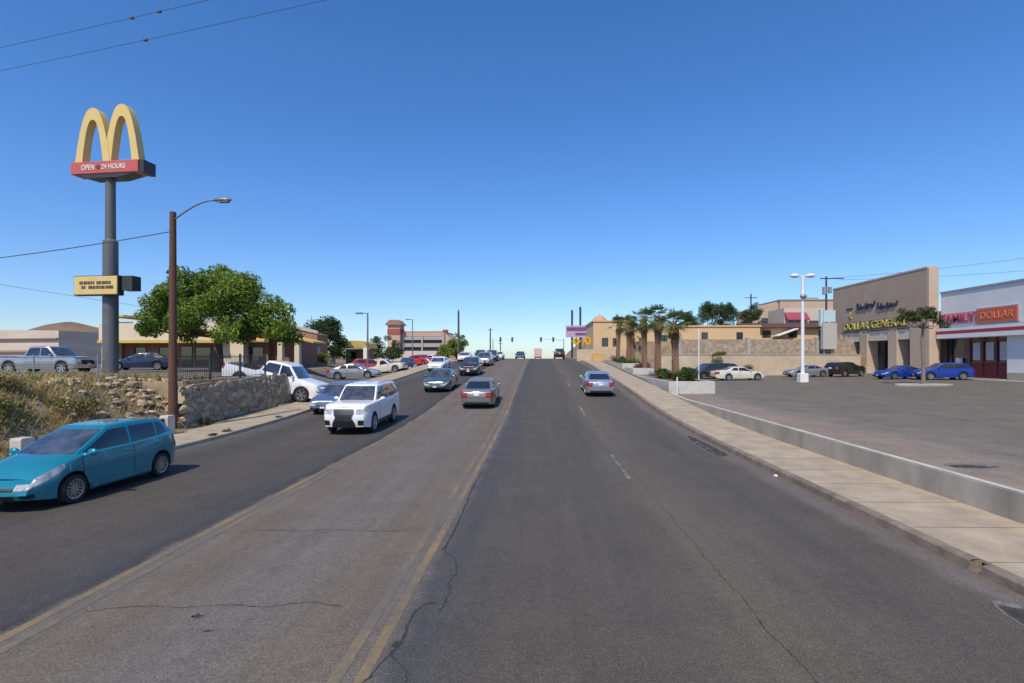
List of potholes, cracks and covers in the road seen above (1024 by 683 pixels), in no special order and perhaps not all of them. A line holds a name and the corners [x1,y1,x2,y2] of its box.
crack [362,472,482,683]
crack [92,602,342,612]
crack [631,470,819,683]
